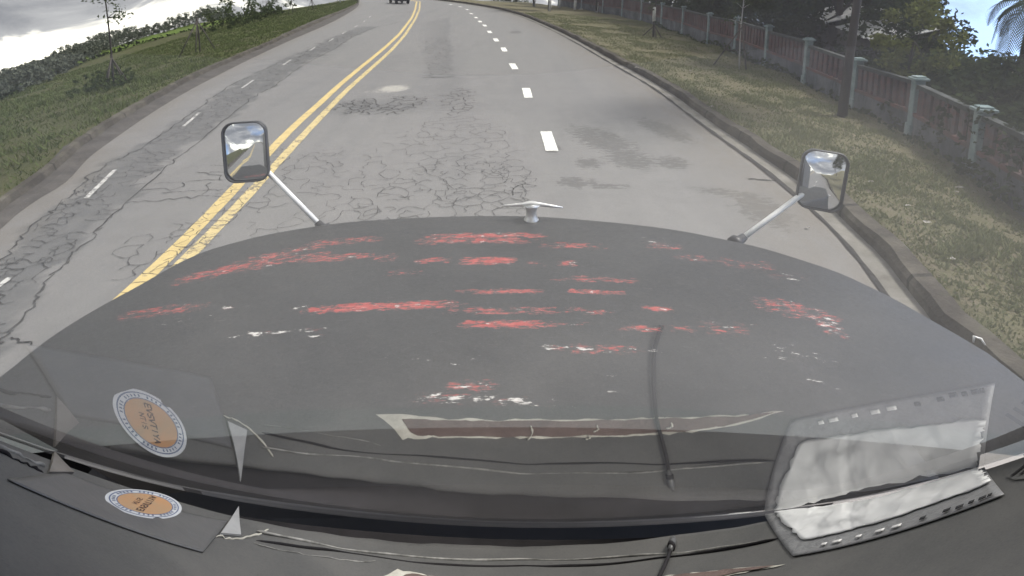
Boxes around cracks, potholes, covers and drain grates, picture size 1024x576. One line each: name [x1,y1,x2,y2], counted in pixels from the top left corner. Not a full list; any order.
crack [0,22,397,345]
crack [441,88,476,116]
crack [335,96,427,115]
crack [316,116,537,223]
